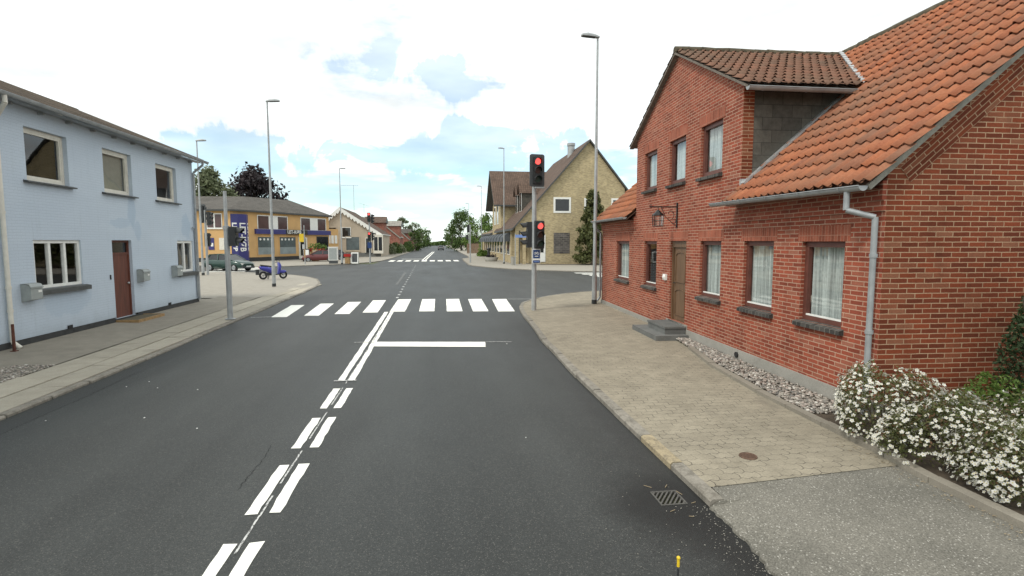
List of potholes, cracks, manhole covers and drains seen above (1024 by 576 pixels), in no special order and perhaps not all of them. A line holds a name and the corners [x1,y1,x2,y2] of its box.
drain grate [650,490,688,506]
manhole cover [739,452,758,460]
